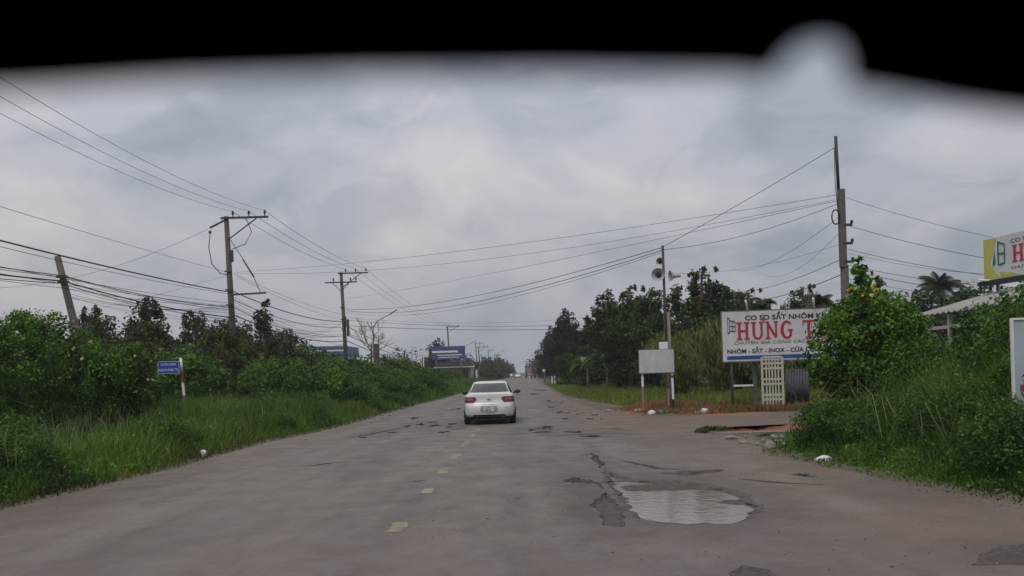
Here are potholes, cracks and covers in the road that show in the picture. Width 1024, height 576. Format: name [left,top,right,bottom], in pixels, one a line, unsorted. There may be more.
crack [588,453,691,489]
pothole [601,468,764,525]
pothole [589,492,625,527]
